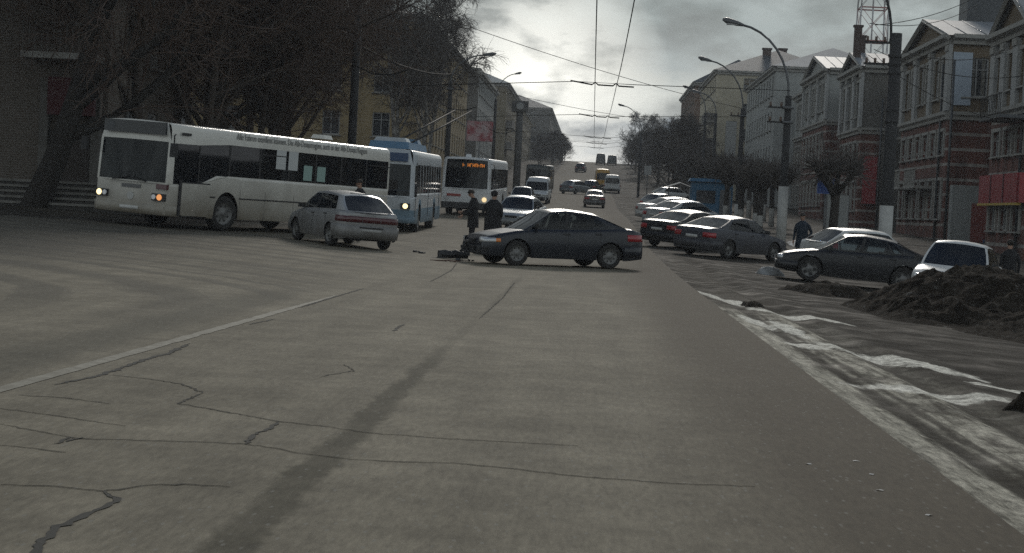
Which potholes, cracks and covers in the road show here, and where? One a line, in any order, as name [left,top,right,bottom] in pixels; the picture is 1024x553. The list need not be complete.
crack [1,343,755,487]
crack [0,483,228,553]
